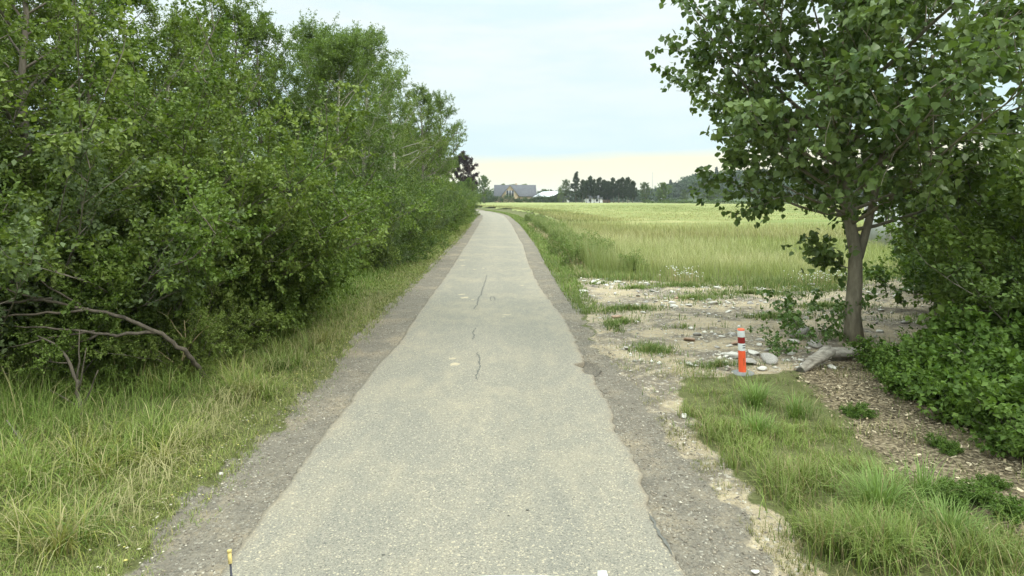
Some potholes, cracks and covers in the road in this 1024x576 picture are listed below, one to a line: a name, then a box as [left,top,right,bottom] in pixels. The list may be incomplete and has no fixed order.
crack [472,328,481,380]
